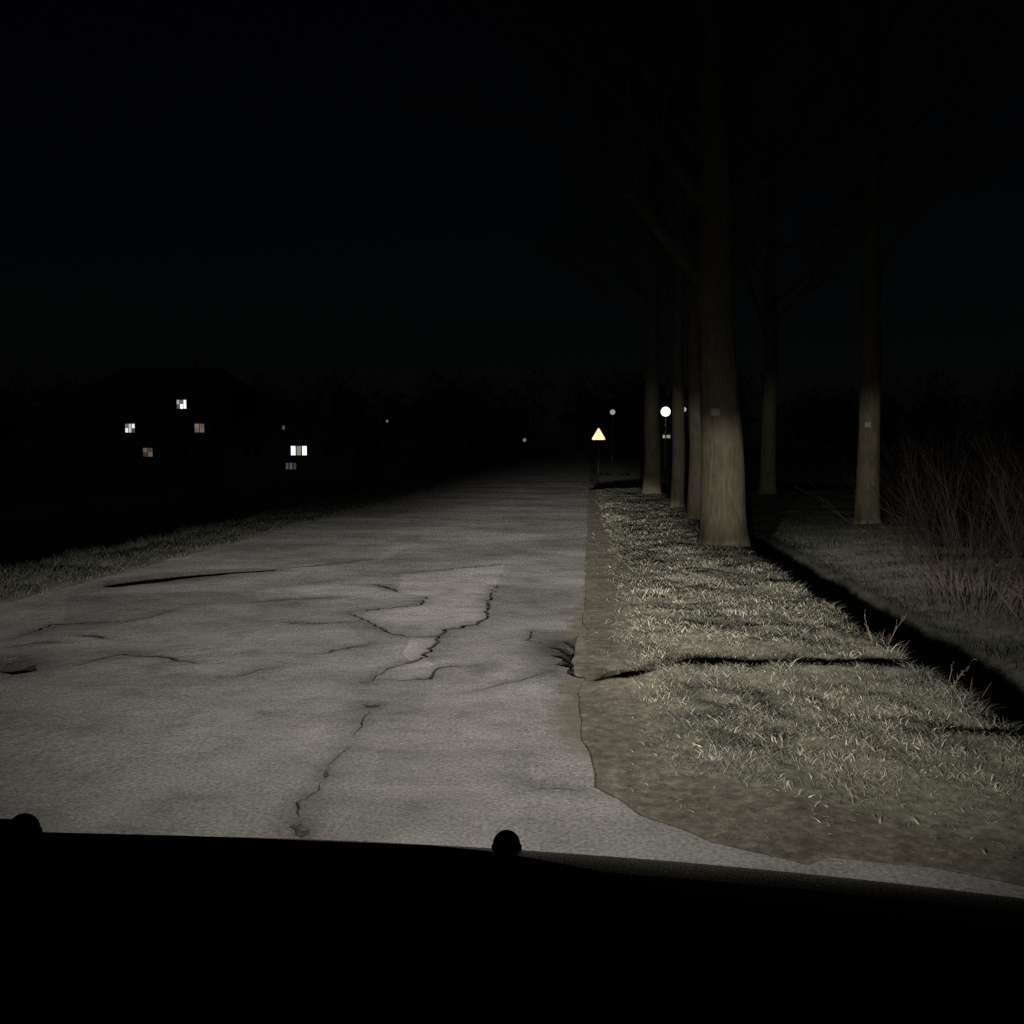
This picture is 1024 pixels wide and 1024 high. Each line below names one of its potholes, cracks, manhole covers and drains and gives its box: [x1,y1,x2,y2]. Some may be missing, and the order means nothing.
crack [252,584,544,690]
crack [526,631,559,644]
pothole [0,656,39,675]
crack [6,610,195,665]
